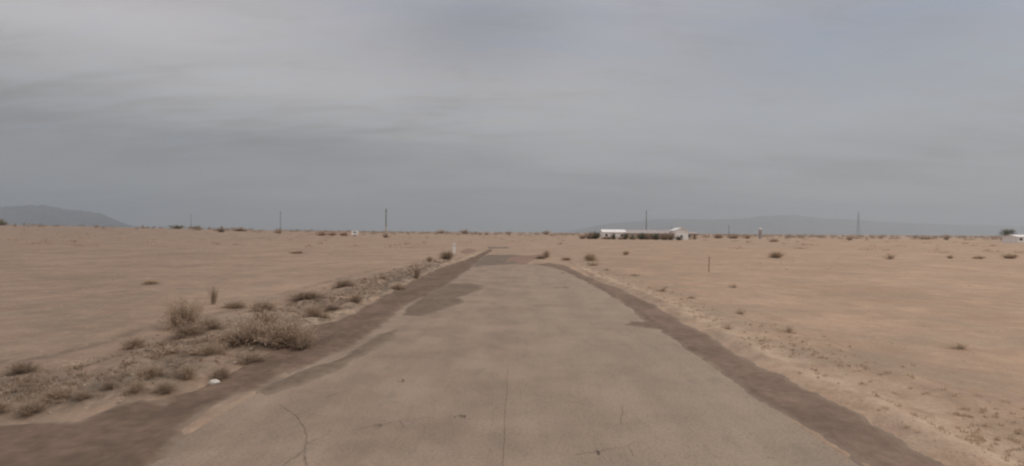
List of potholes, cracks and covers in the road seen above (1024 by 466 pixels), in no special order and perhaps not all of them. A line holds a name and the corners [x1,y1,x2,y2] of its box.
crack [280,405,330,466]
